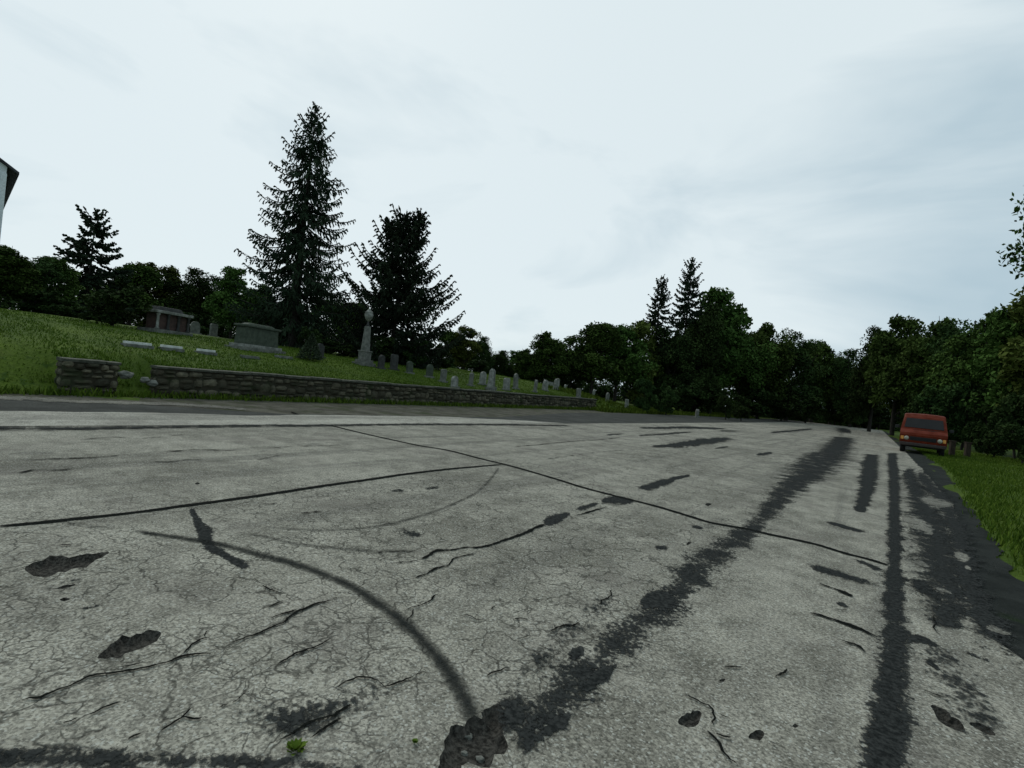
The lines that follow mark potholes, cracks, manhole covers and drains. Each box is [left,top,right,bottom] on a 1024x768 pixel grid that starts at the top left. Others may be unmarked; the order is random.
crack [810,583,875,652]
crack [686,694,737,763]
crack [406,594,437,620]
pothole [438,704,508,768]
pothole [25,552,109,577]
crack [15,455,117,473]
crack [17,631,249,730]
pothole [97,630,161,659]
pothole [678,710,702,728]
crack [233,585,425,740]
crack [89,434,238,462]
crack [375,524,544,577]
